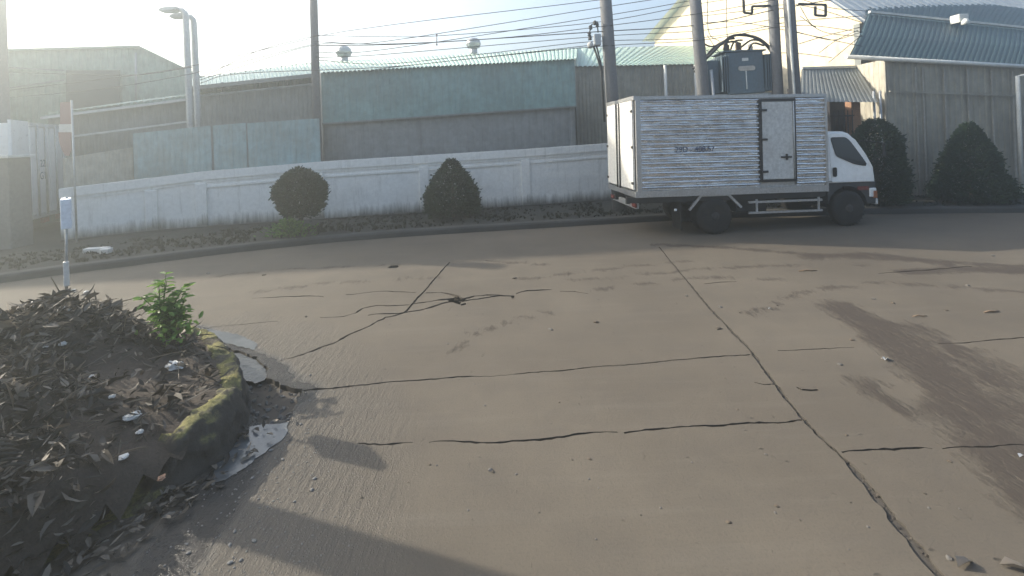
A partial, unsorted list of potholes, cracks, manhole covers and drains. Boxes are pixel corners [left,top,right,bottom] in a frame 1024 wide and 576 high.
crack [842,444,1024,453]
crack [358,419,803,446]
crack [303,354,751,391]
crack [280,289,588,361]
pothole [228,347,302,424]
